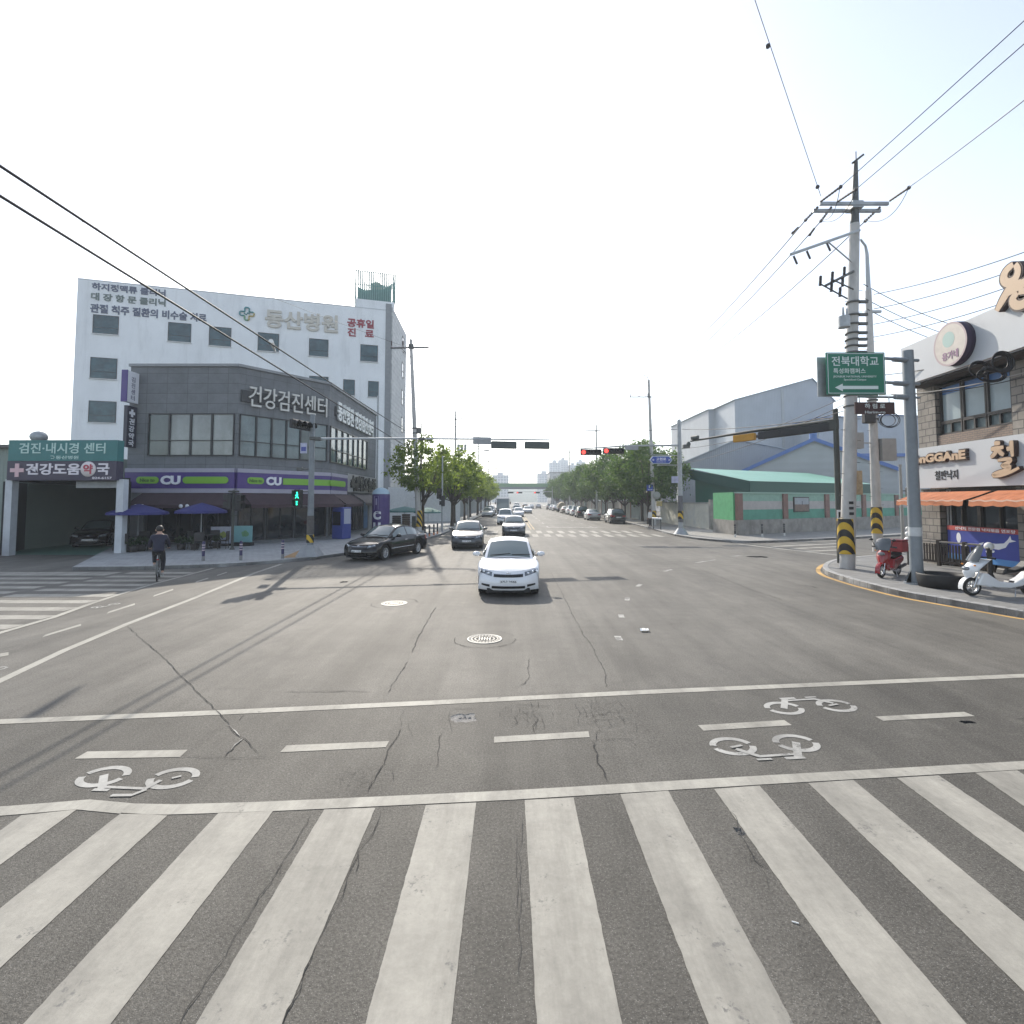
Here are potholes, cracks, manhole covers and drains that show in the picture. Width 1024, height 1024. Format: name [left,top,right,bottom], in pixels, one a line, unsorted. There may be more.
crack [282,811,381,1023]
crack [180,816,310,1023]
crack [332,715,416,792]
crack [728,810,784,911]
manhole cover [467,634,502,644]
crack [569,697,659,780]
crack [128,627,367,758]
crack [499,660,553,733]
